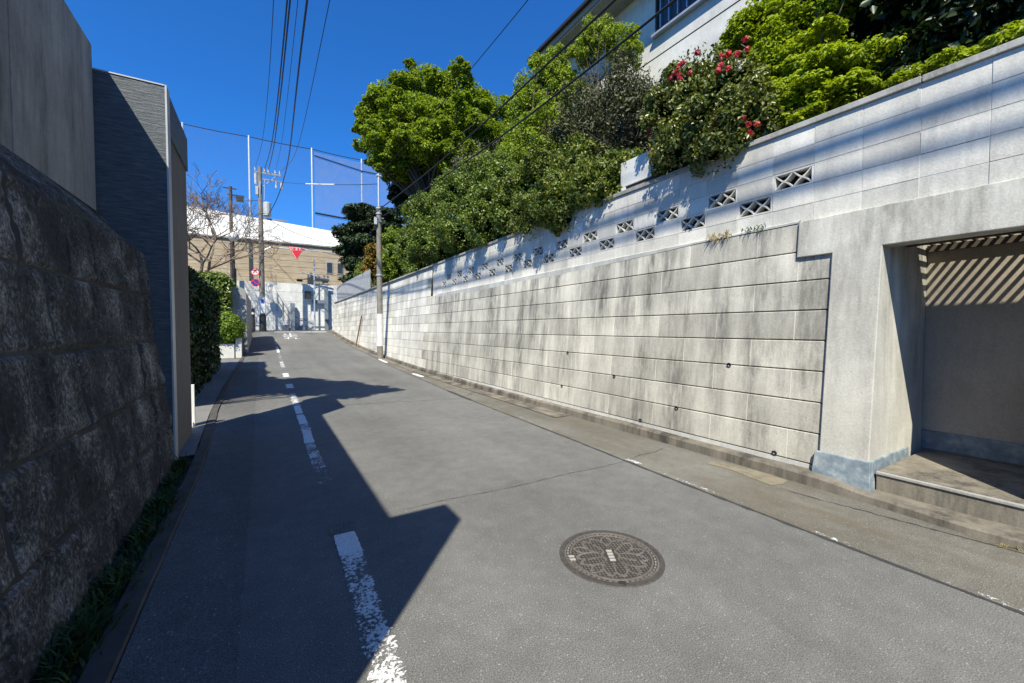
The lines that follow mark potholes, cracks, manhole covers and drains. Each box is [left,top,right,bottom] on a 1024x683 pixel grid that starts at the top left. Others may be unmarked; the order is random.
manhole cover [559,530,665,588]
